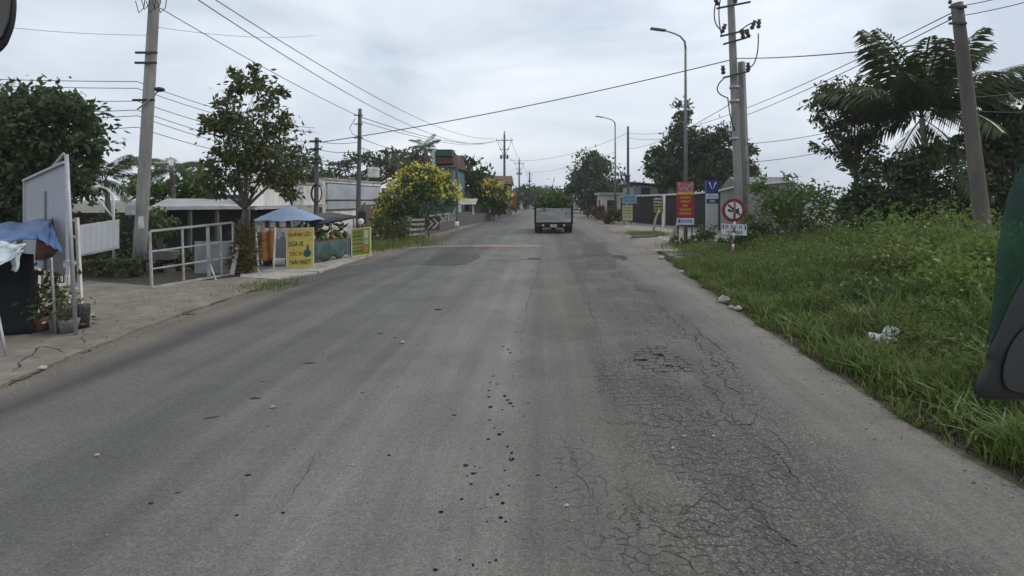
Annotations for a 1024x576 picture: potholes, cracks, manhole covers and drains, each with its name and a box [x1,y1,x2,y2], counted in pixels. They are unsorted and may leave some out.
crack [7,346,63,387]
crack [552,289,856,576]
